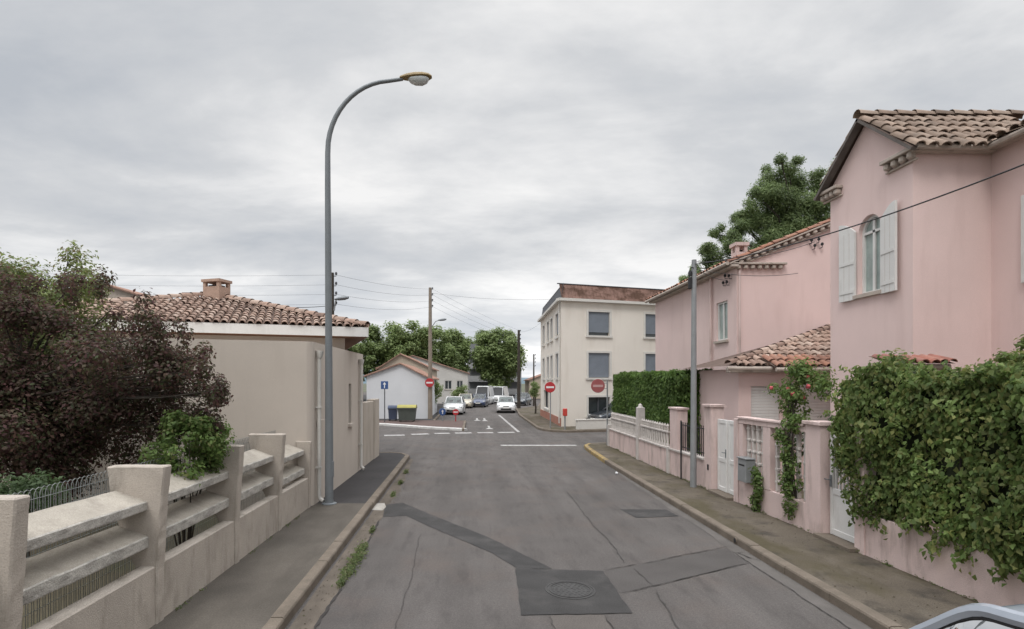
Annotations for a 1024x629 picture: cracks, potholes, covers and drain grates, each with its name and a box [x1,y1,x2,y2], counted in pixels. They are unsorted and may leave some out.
crack [567,492,851,629]
manhole cover [545,581,596,599]
